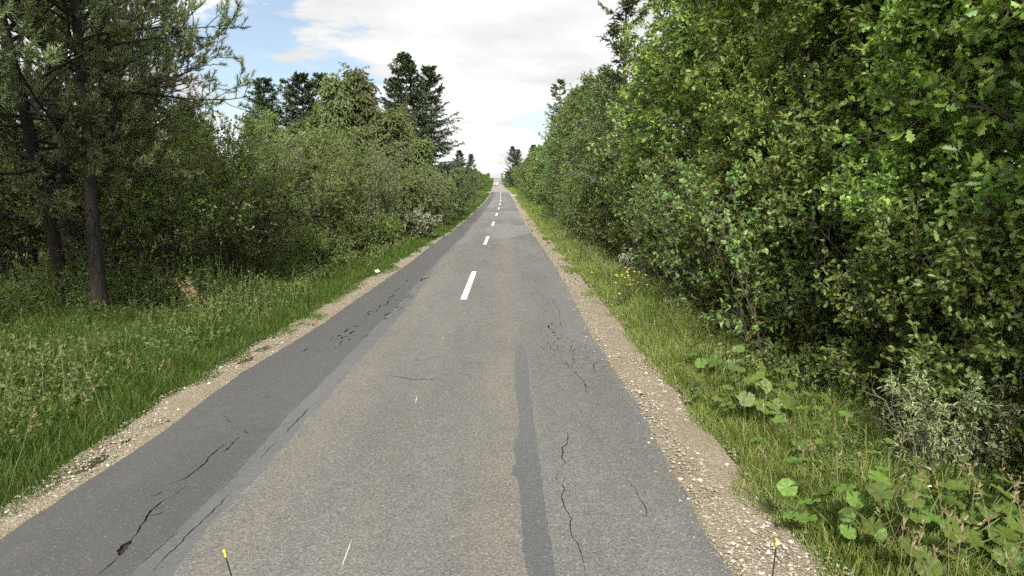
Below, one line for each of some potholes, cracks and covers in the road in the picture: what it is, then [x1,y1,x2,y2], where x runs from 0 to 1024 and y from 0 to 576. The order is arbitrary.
pothole [116,540,131,556]
crack [556,432,586,571]
crack [332,279,411,349]
crack [541,300,613,387]
crack [99,409,308,575]
